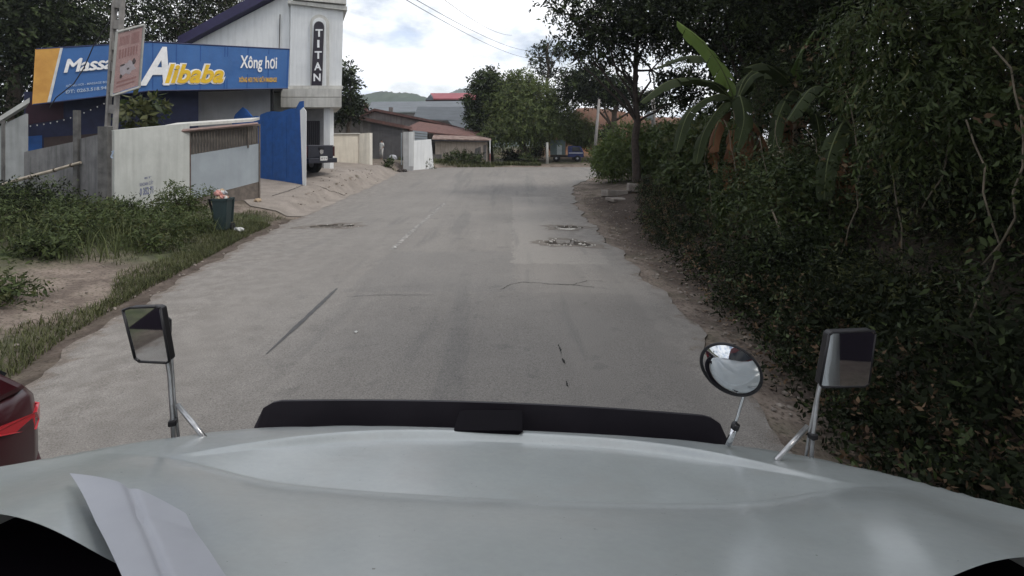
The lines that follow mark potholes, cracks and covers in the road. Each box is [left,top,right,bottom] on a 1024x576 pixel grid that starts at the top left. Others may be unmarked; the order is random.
pothole [531,237,609,249]
